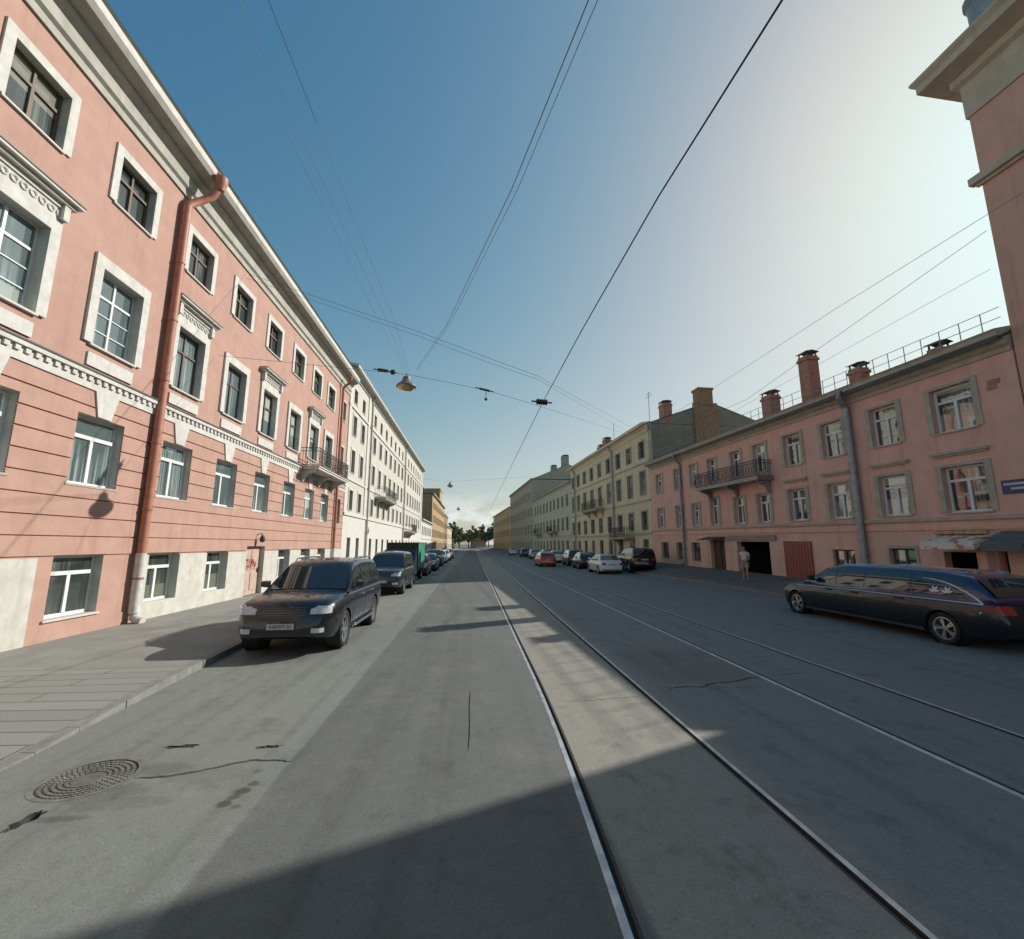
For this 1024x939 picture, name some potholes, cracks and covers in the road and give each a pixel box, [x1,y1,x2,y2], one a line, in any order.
crack [669,677,760,689]
manhole cover [25,757,145,803]
pothole [0,809,48,834]
crack [135,759,292,779]
